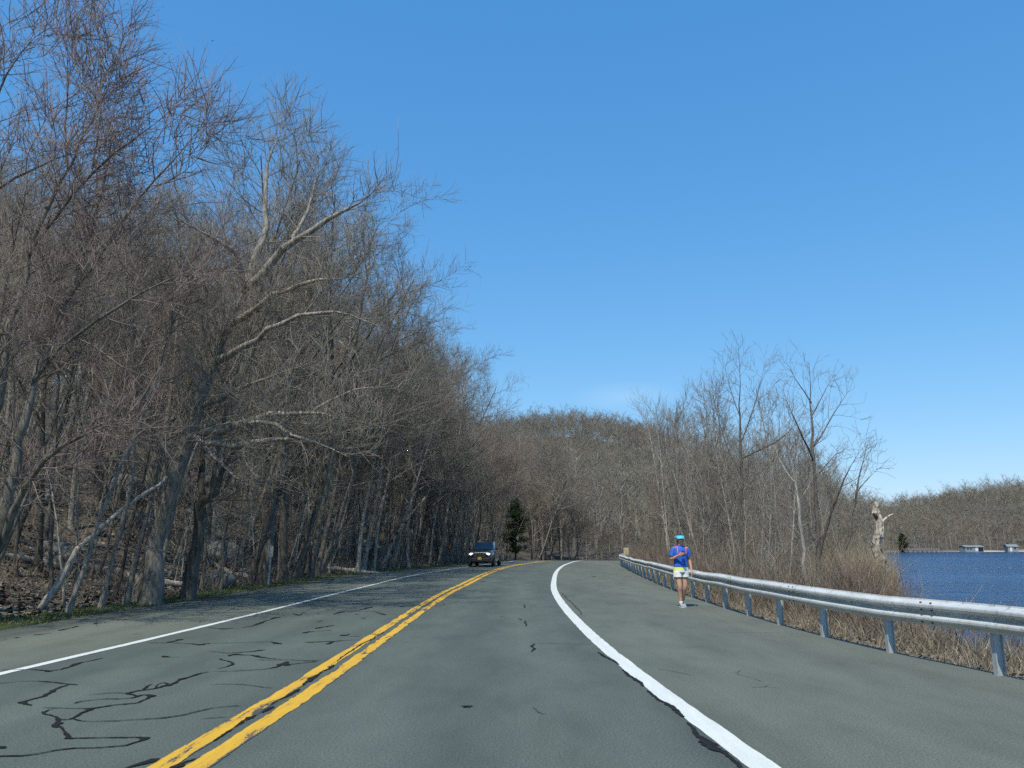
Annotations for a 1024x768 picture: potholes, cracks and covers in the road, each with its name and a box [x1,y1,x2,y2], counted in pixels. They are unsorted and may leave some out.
crack [5,606,406,741]
